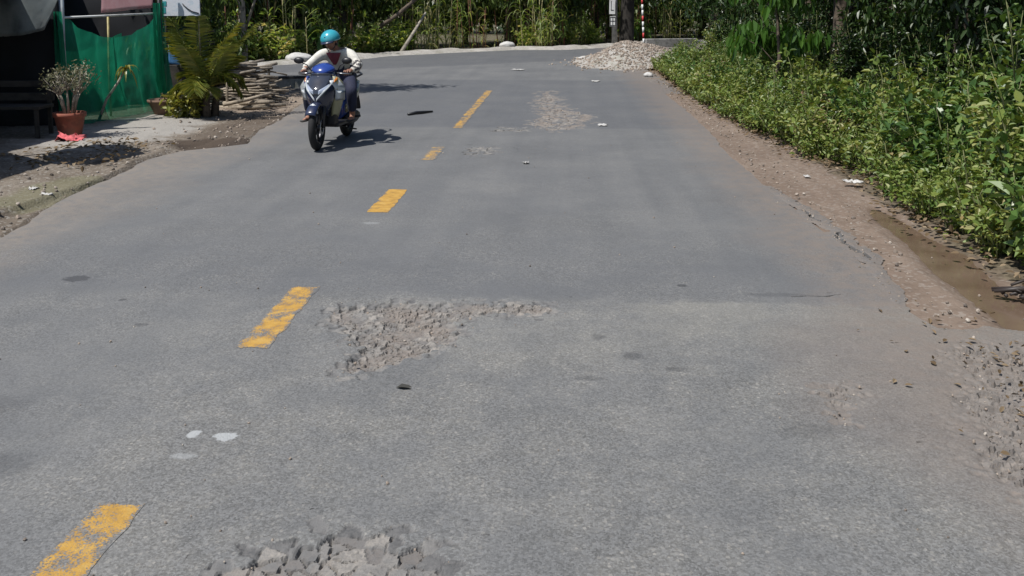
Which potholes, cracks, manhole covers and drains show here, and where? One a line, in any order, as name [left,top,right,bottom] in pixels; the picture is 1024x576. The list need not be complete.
pothole [297,292,586,390]
pothole [440,144,519,160]
crack [763,186,933,311]
pothole [501,89,612,135]
pothole [165,501,496,576]
